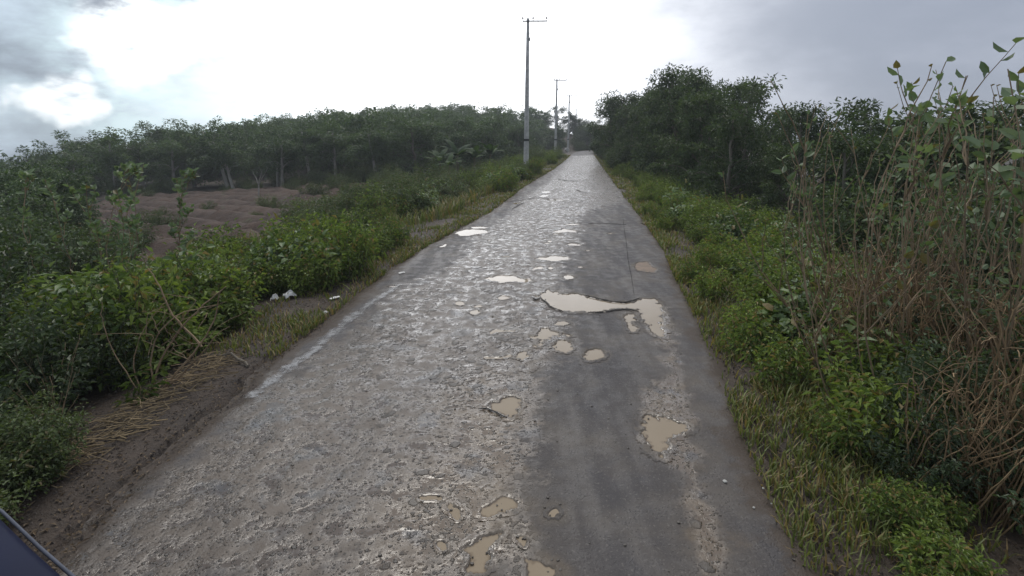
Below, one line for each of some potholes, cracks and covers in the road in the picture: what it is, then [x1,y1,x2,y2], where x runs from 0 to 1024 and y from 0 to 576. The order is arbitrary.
pothole [522,326,577,349]
pothole [452,228,490,237]
pothole [453,526,510,576]
pothole [547,338,577,354]
pothole [629,260,660,274]
pothole [472,493,523,521]
pothole [441,499,466,523]
pothole [529,287,674,340]
pothole [481,393,528,421]
pothole [579,347,610,363]
pothole [631,409,700,463]
pothole [518,553,563,576]
